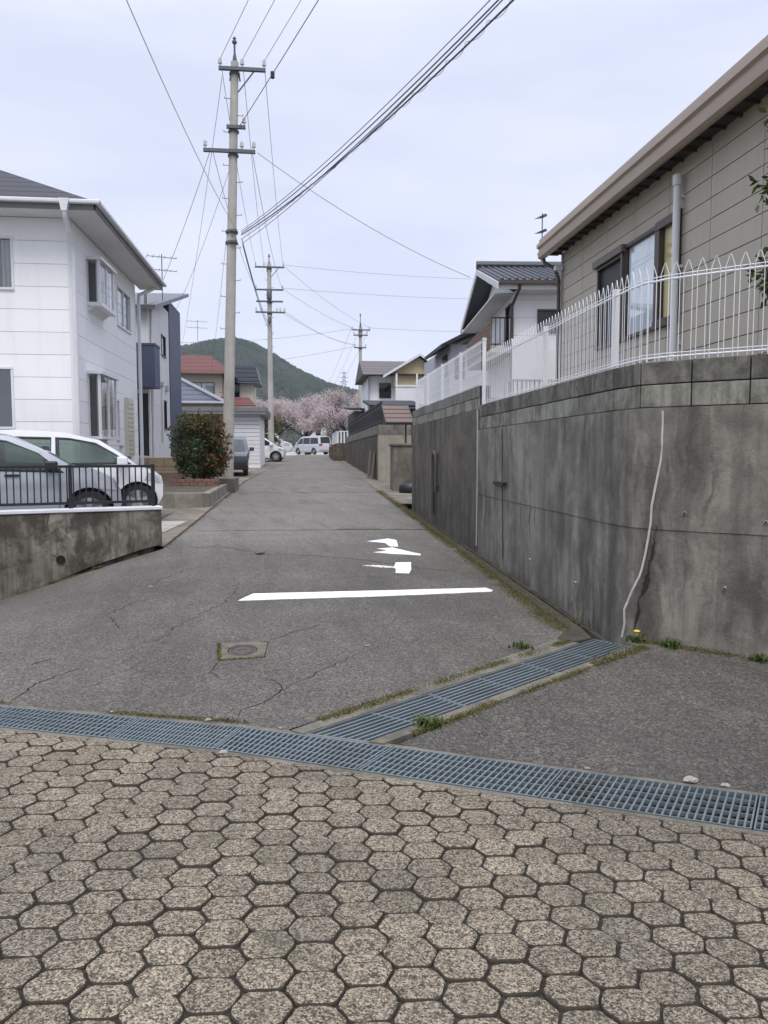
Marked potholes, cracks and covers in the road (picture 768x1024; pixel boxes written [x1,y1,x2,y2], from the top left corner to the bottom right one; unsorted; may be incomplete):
drain grate [540,769,758,830]
drain grate [359,747,563,798]
drain grate [428,663,556,706]
drain grate [522,639,630,673]
crack [13,658,102,700]
drain grate [306,694,465,743]
drain grate [216,727,393,771]
drain grate [0,707,137,739]
crack [131,578,239,648]
drain grate [108,718,242,750]
crack [236,652,363,716]
drain grate [754,795,768,832]
